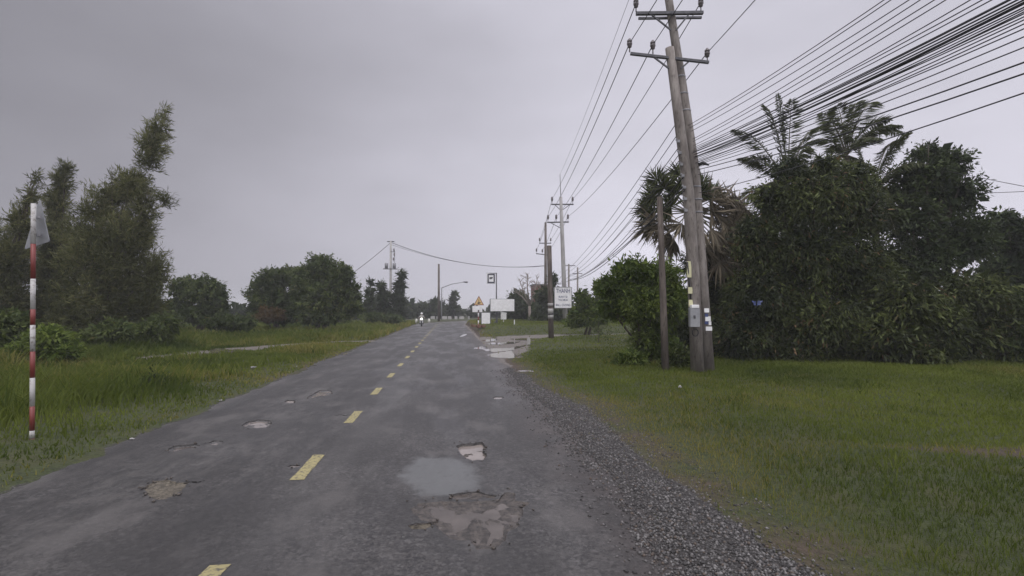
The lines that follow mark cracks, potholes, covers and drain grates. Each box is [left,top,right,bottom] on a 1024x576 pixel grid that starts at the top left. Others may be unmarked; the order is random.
pothole [406,488,534,550]
pothole [307,390,333,398]
pothole [242,420,272,429]
pothole [138,477,190,502]
pothole [454,441,487,463]
pothole [165,442,200,453]
